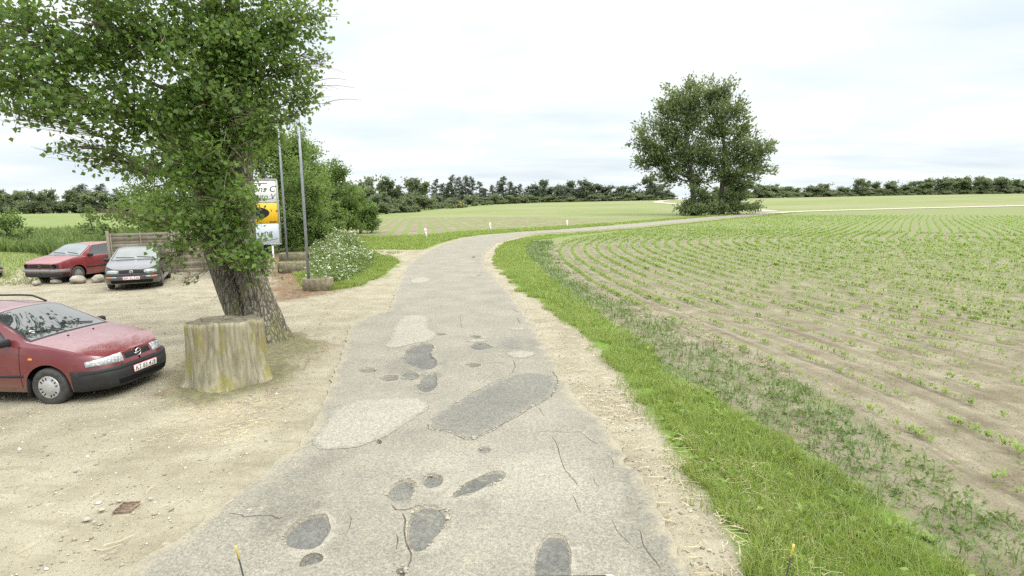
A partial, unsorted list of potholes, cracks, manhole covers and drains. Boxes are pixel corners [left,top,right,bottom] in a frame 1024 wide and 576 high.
crack [541,431,614,511]
crack [612,520,661,569]
crack [392,503,423,567]
